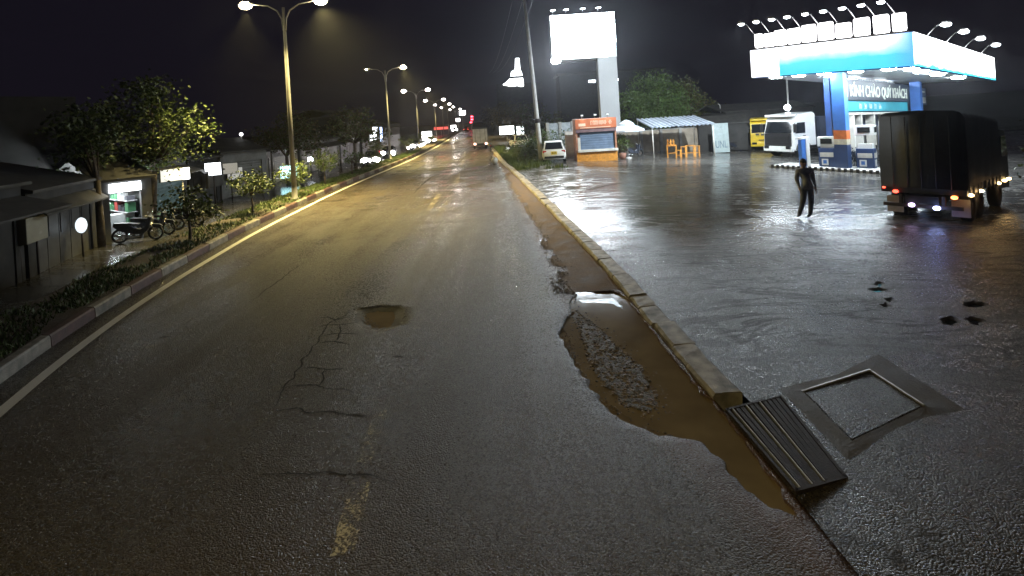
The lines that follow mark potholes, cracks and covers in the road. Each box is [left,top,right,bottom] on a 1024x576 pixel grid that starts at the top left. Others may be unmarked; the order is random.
crack [273,308,405,417]
manhole cover [780,355,964,459]
pothole [355,306,405,330]
crack [261,471,392,482]
pothole [939,315,961,326]
pothole [964,317,987,326]
pothole [553,281,796,516]
drain grate [726,395,848,495]
